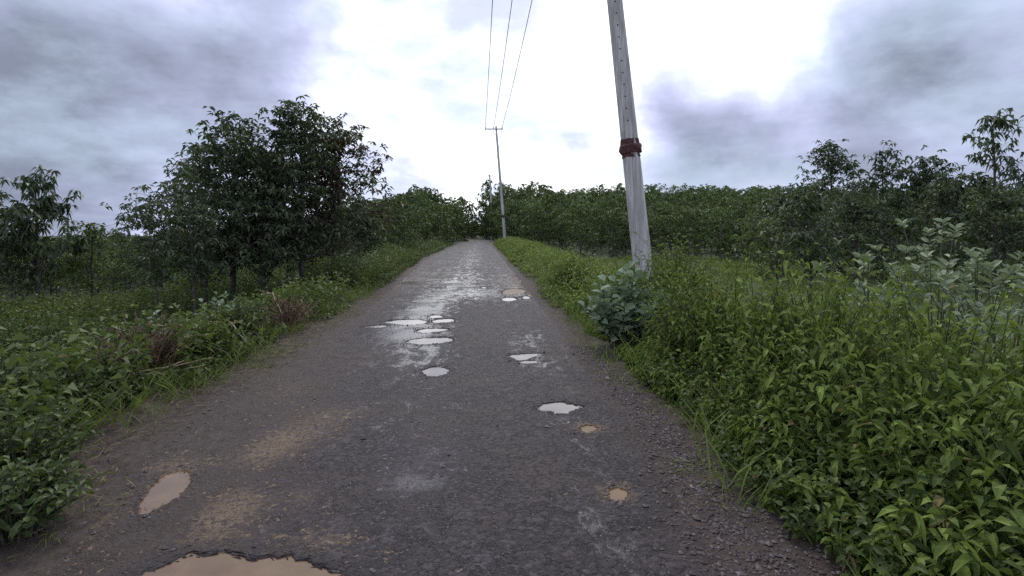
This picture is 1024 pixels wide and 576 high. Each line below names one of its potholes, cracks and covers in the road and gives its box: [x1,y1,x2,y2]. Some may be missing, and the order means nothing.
pothole [138,549,353,576]
pothole [405,336,455,345]
pothole [578,424,600,433]
pothole [606,487,629,501]
pothole [536,401,584,414]
pothole [421,366,449,376]
pothole [138,469,192,515]
